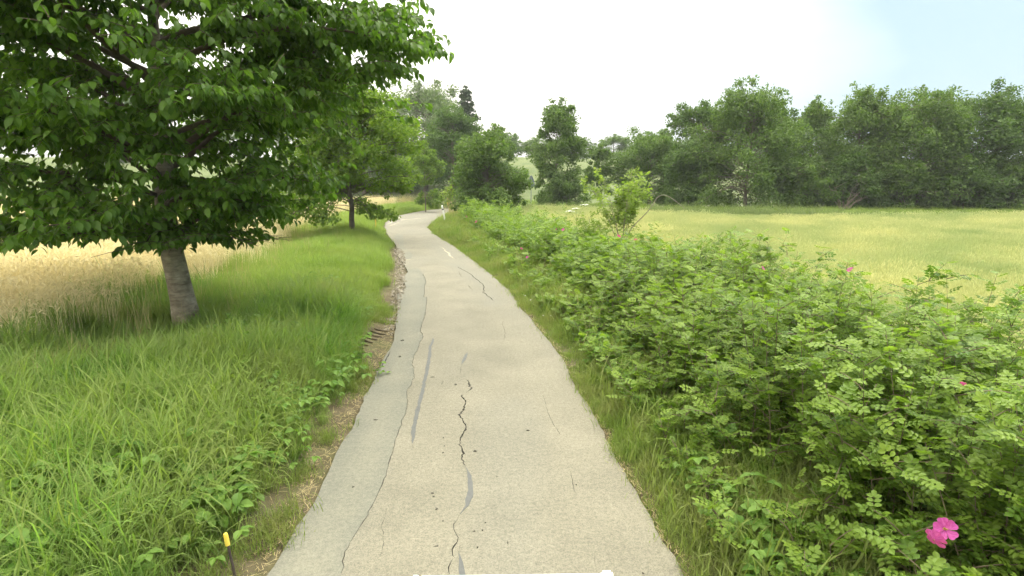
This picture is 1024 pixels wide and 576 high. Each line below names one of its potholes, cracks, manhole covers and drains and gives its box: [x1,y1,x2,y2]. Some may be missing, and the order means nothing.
crack [448,368,473,575]
